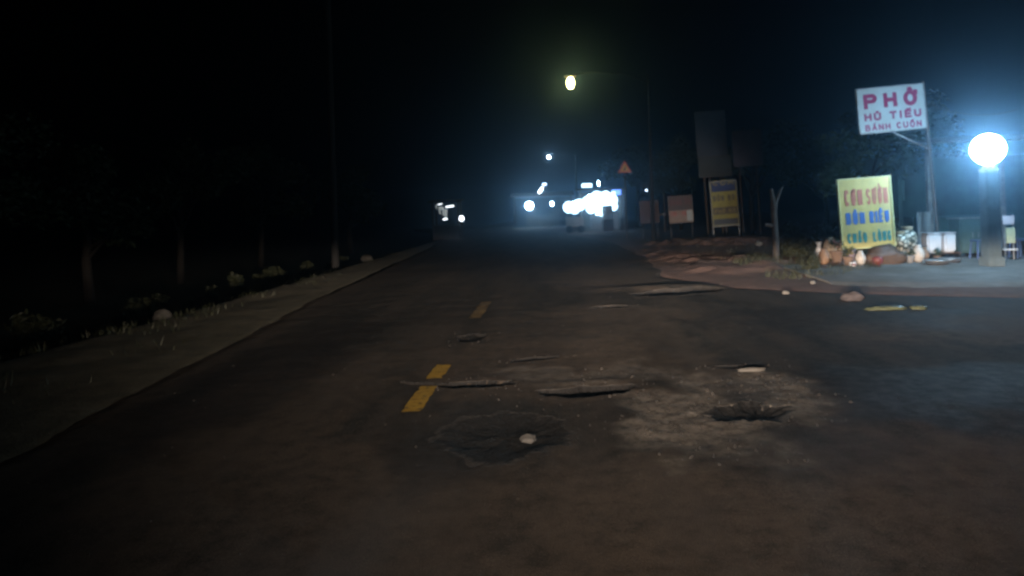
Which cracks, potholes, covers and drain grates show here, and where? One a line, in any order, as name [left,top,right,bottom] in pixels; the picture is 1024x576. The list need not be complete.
pothole [623,285,732,297]
pothole [445,331,497,344]
pothole [525,381,654,401]
pothole [705,363,779,371]
pothole [417,408,589,472]
pothole [432,377,527,391]
pothole [689,399,807,425]
